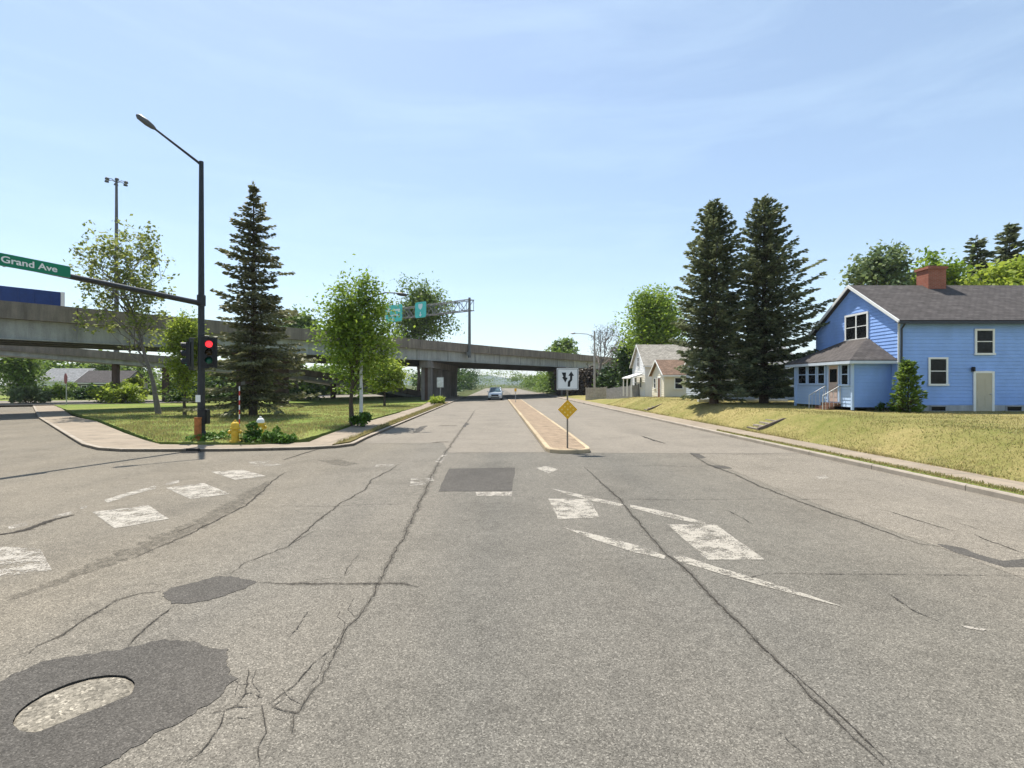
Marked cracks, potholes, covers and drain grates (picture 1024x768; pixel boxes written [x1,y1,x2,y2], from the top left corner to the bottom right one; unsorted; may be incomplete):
crack [29,584,163,653]
crack [643,454,1019,552]
crack [133,449,317,558]
crack [183,417,471,763]
crack [587,469,962,764]
crack [0,514,75,535]
